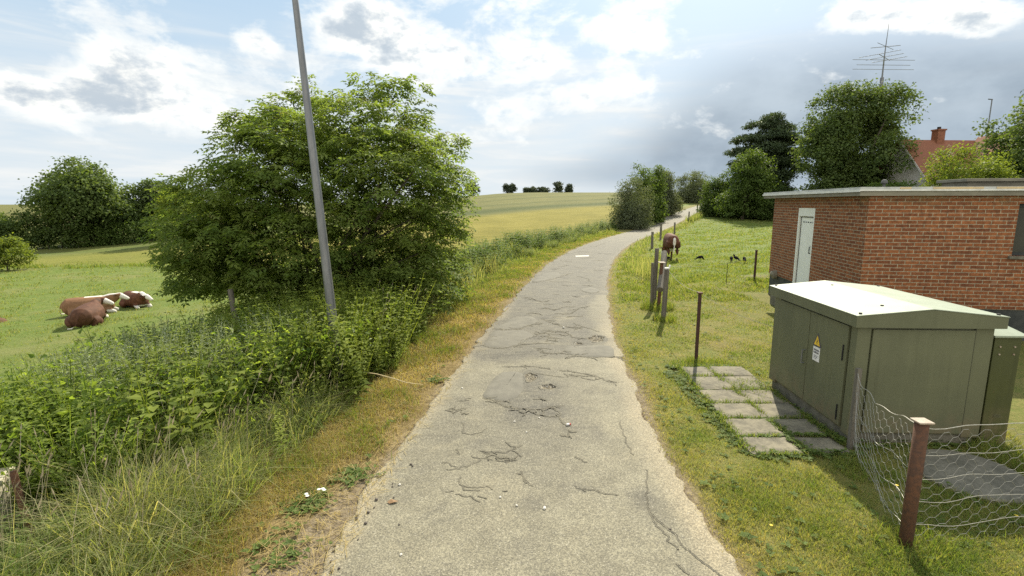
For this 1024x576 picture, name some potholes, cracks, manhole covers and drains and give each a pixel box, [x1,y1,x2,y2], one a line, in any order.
pothole [585,335,608,343]
pothole [523,371,540,383]
crack [478,242,628,385]
pothole [538,383,558,391]
crack [574,485,619,495]
crack [441,396,574,502]
crack [619,421,722,576]
